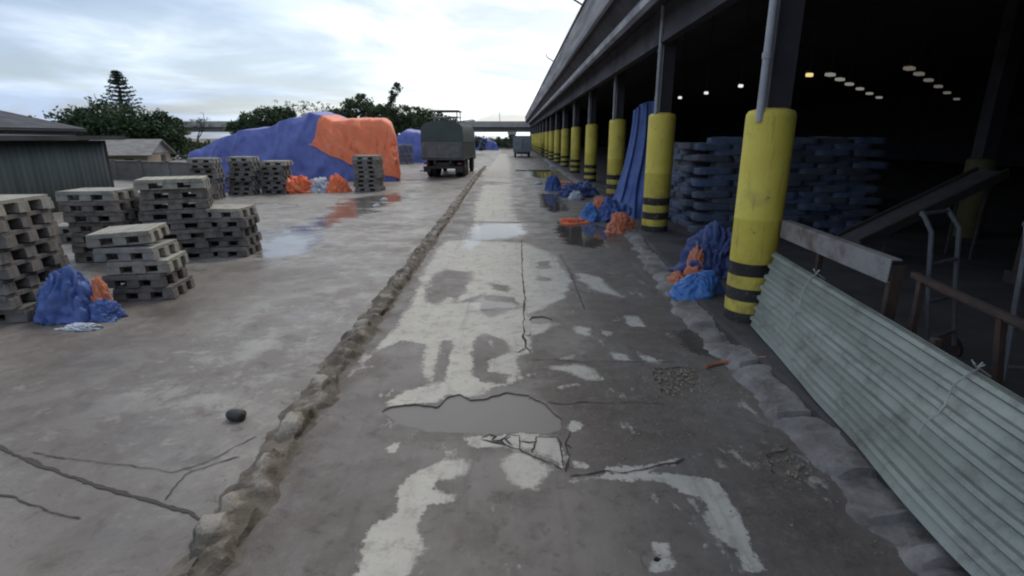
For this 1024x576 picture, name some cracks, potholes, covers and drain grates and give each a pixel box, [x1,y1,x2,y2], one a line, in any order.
crack [481,433,685,476]
crack [33,436,255,499]
crack [514,240,674,362]
pothole [639,361,714,404]
crack [0,494,80,518]
pothole [748,439,834,493]
pothole [366,386,578,444]
